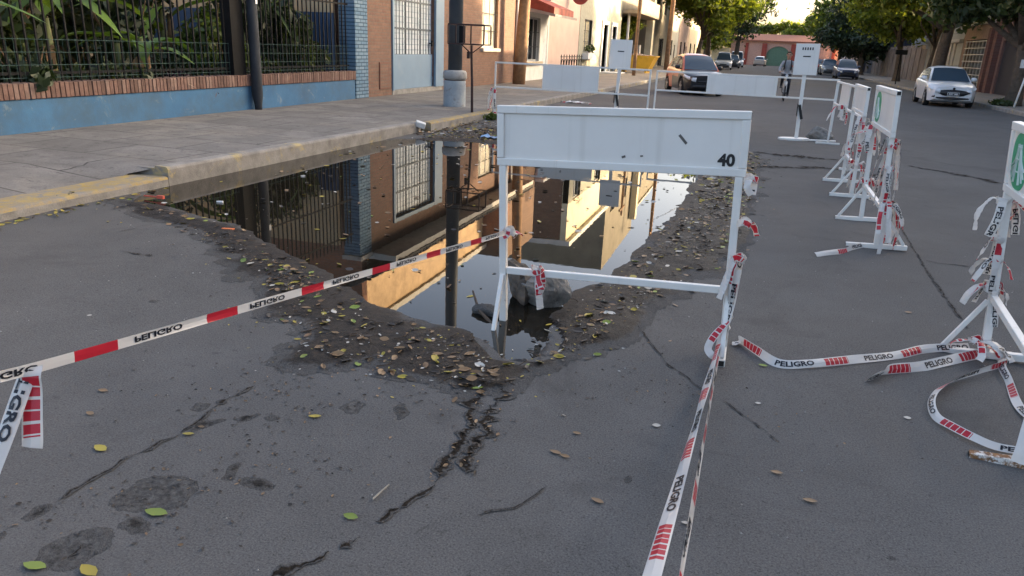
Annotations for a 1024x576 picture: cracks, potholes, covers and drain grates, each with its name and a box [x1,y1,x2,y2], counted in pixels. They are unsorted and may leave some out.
crack [376,388,547,522]
crack [725,401,778,441]
crack [181,386,253,432]
crack [638,326,702,389]
pothole [482,329,552,362]
crack [758,151,844,170]
crack [909,165,1001,183]
